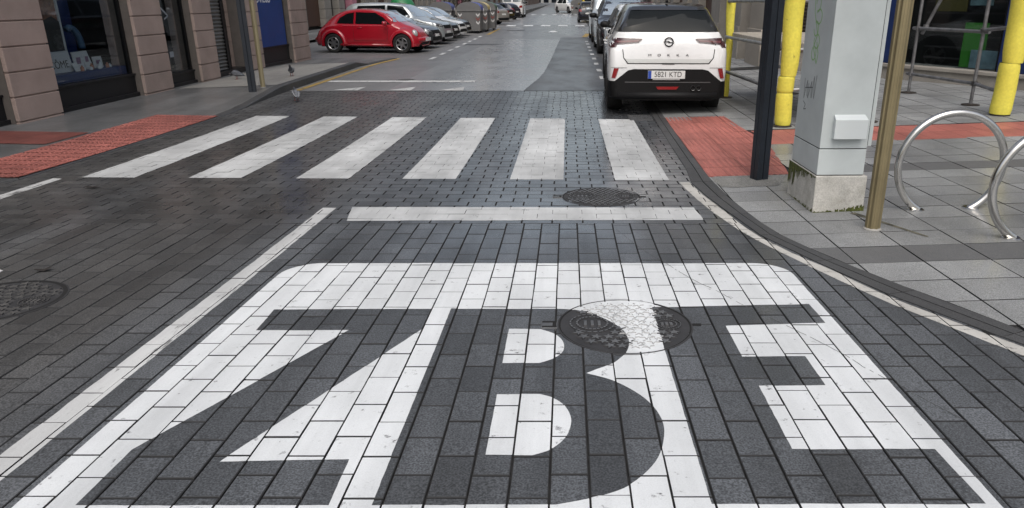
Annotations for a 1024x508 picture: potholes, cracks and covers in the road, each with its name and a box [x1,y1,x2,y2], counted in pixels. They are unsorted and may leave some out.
manhole cover [0,280,70,320]
manhole cover [541,300,701,356]
manhole cover [553,188,646,207]
